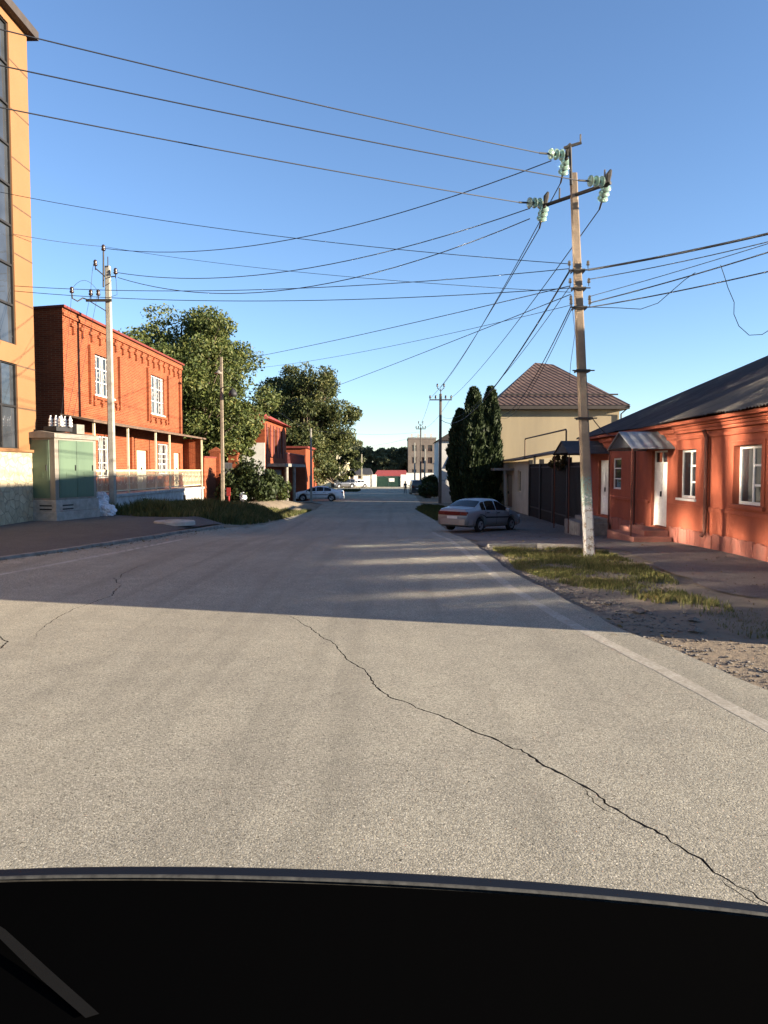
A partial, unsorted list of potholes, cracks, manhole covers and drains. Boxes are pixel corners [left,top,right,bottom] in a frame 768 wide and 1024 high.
crack [271,610,768,905]
